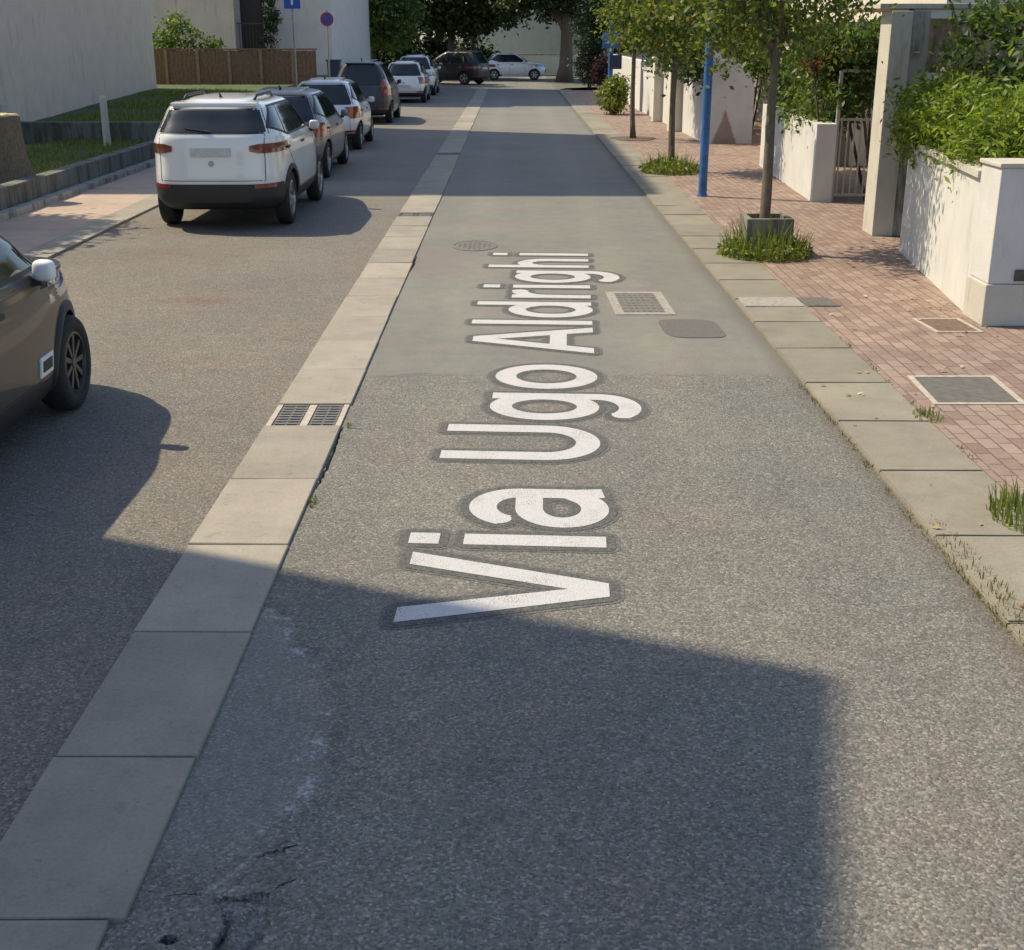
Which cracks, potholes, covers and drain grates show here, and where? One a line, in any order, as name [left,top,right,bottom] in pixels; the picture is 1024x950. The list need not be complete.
manhole cover [796,297,840,307]
manhole cover [912,318,984,333]
crack [163,844,299,897]
manhole cover [451,240,498,251]
drain grate [266,405,350,426]
manhole cover [907,375,1024,405]
manhole cover [659,319,726,338]
